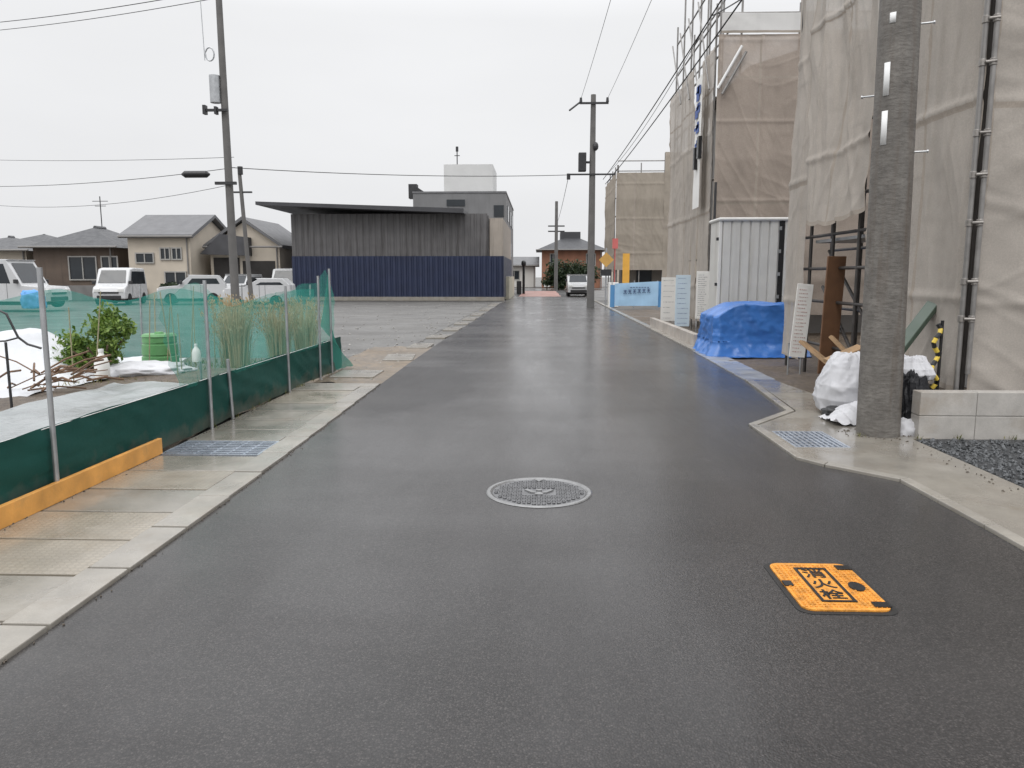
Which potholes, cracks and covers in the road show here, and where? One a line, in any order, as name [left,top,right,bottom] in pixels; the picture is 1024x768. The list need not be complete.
drain grate [159,440,279,457]
manhole cover [486,477,592,508]
drain grate [772,431,851,448]
